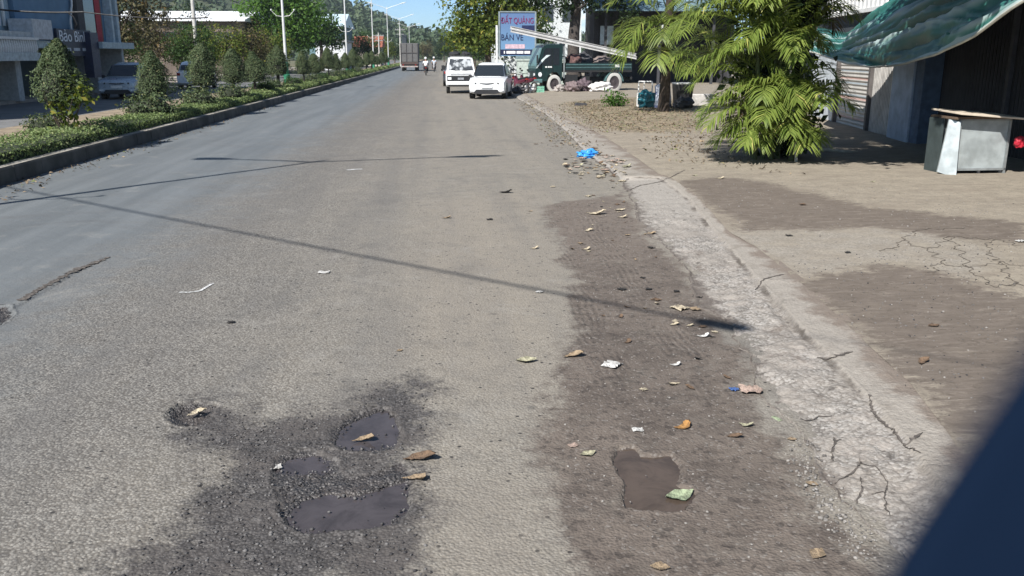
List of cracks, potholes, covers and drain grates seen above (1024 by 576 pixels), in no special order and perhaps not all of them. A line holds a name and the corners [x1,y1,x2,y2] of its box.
crack [800,415,891,516]
pothole [156,398,227,429]
pothole [605,442,705,516]
pothole [315,403,410,457]
pothole [264,445,424,538]
crack [817,351,853,360]
crack [879,227,1024,287]
